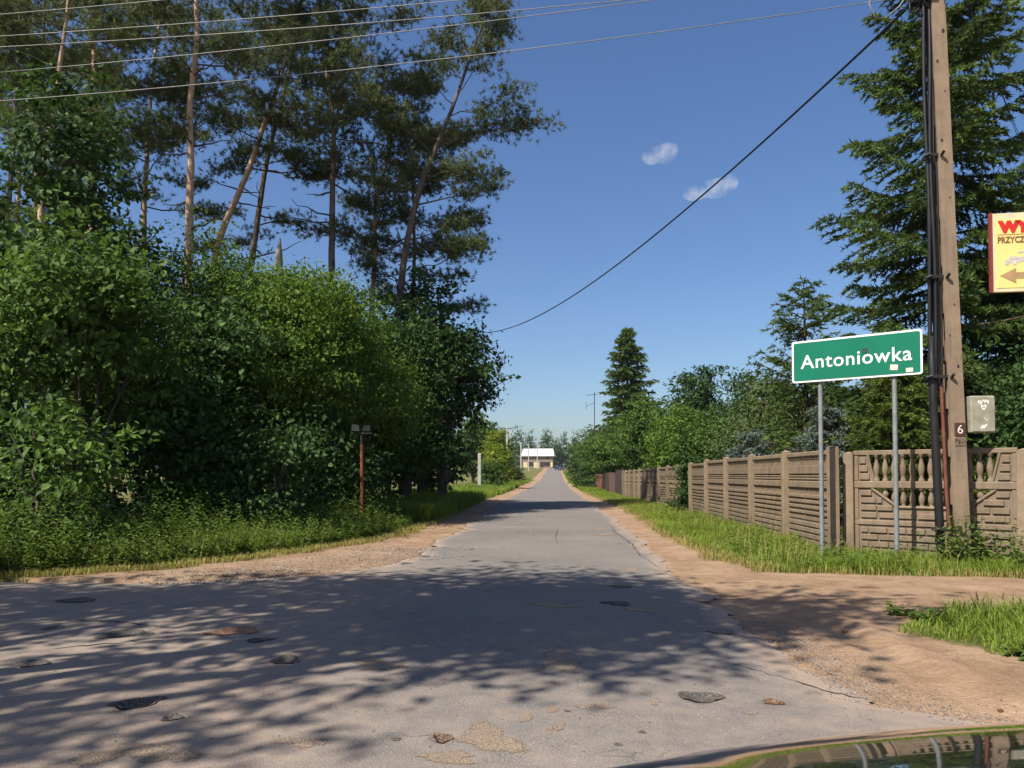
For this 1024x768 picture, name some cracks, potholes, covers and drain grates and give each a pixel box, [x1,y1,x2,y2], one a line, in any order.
pothole [270,654,299,664]
pothole [15,659,51,668]
pothole [94,629,155,638]
pothole [108,696,167,710]
crack [733,663,924,712]
pothole [202,626,258,635]
pothole [678,691,726,703]
pothole [160,713,184,721]
